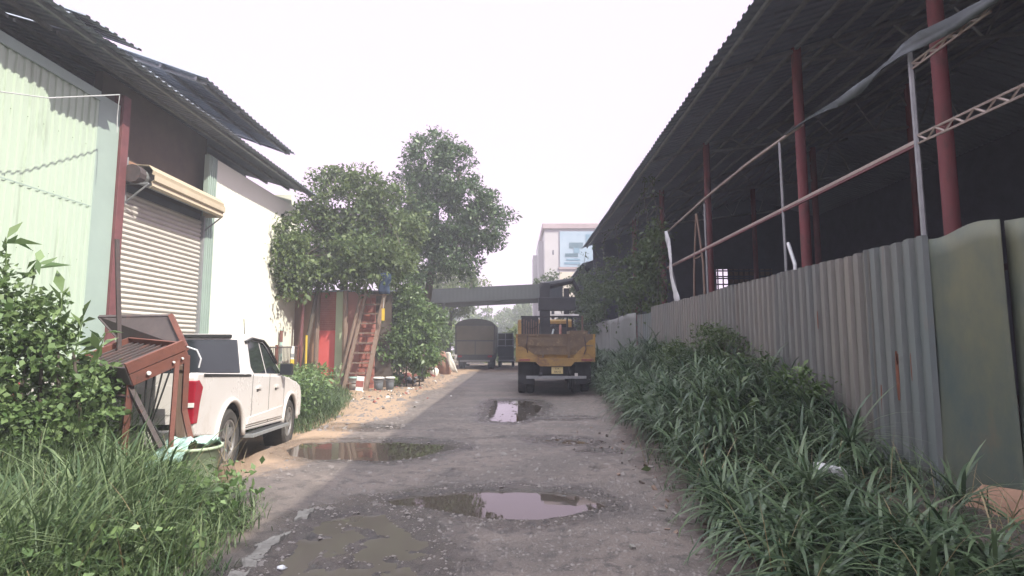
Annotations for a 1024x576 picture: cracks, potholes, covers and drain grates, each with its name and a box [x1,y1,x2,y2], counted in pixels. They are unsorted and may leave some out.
pothole [249,498,455,576]
pothole [536,436,598,445]
pothole [284,438,462,459]
pothole [485,399,547,423]
pothole [380,485,613,519]
